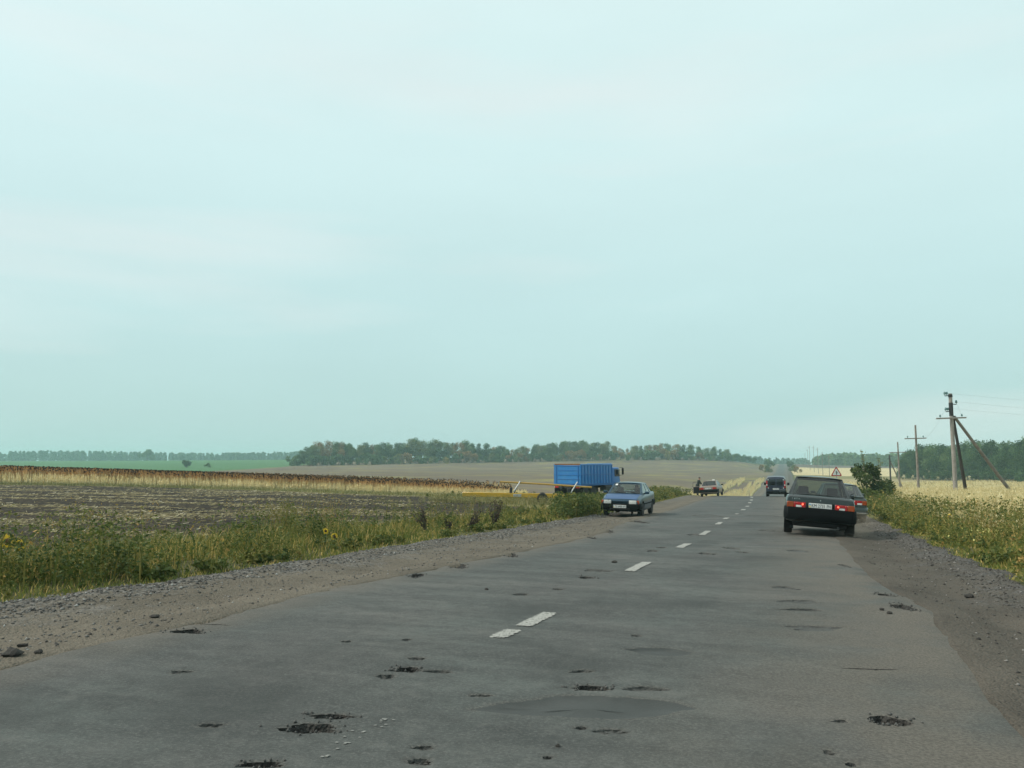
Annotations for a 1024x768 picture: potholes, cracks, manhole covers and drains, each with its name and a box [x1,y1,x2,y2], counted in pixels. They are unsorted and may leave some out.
pothole [889,602,922,612]
pothole [384,664,423,673]
pothole [475,696,695,719]
pothole [235,757,286,768]
pothole [301,710,362,720]
pothole [259,719,348,736]
pothole [561,683,615,691]
pothole [867,712,924,726]
